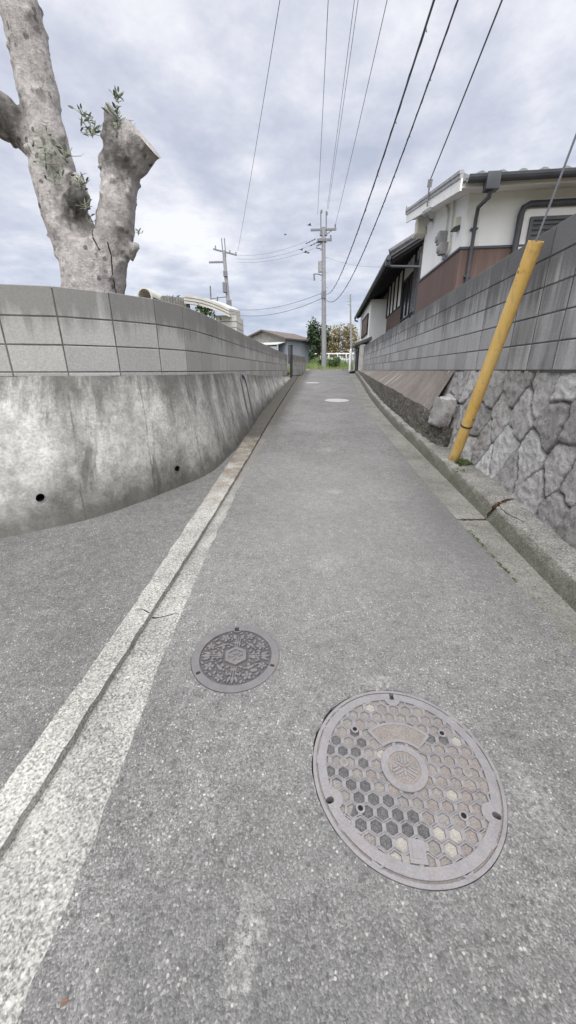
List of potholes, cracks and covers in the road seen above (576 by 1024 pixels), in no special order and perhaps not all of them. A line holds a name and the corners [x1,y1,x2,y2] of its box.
manhole cover [313,691,508,891]
crack [457,499,523,522]
manhole cover [191,625,279,693]
